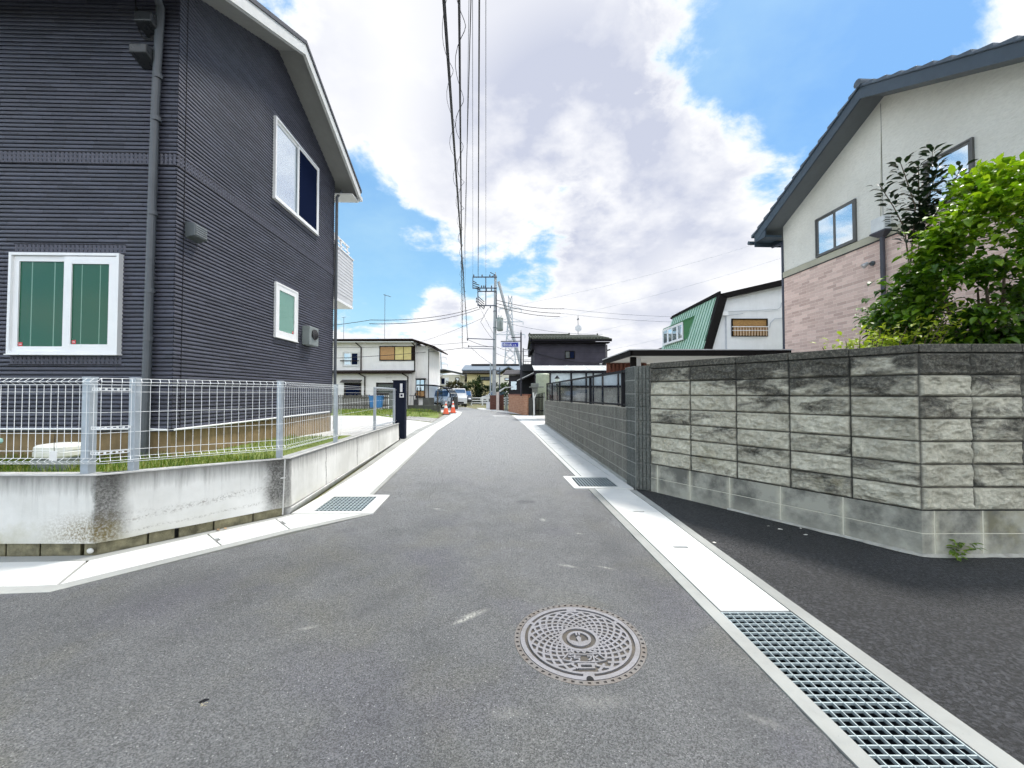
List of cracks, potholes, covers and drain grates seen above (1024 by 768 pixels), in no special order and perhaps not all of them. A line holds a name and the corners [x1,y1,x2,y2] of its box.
manhole cover [514,604,647,686]
drain grate [291,495,390,514]
drain grate [721,612,995,768]
drain grate [563,476,634,490]
